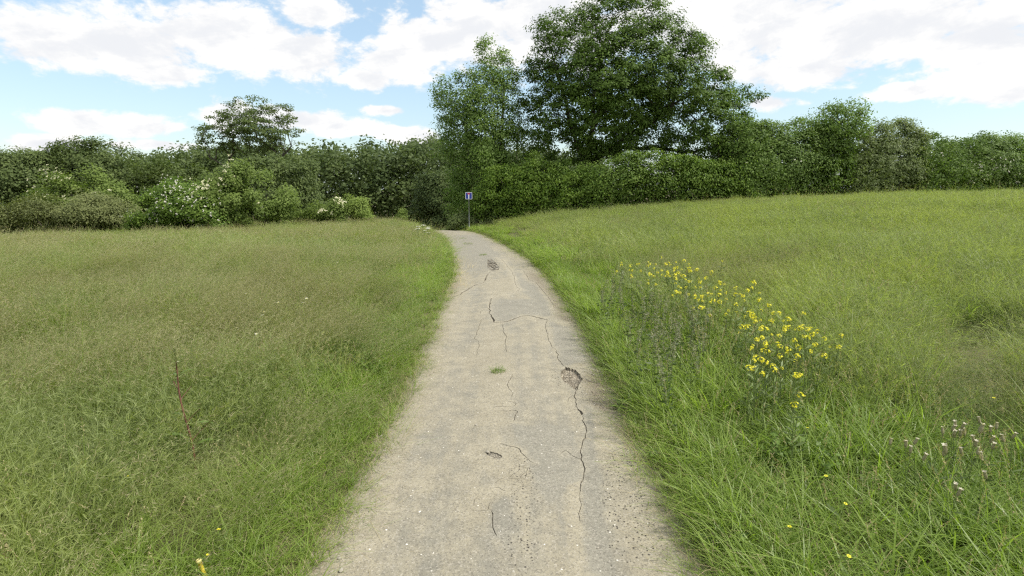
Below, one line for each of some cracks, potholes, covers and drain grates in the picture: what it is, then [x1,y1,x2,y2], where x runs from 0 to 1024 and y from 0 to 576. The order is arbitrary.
crack [452,256,609,520]
pothole [561,367,583,390]
crack [474,443,536,536]
